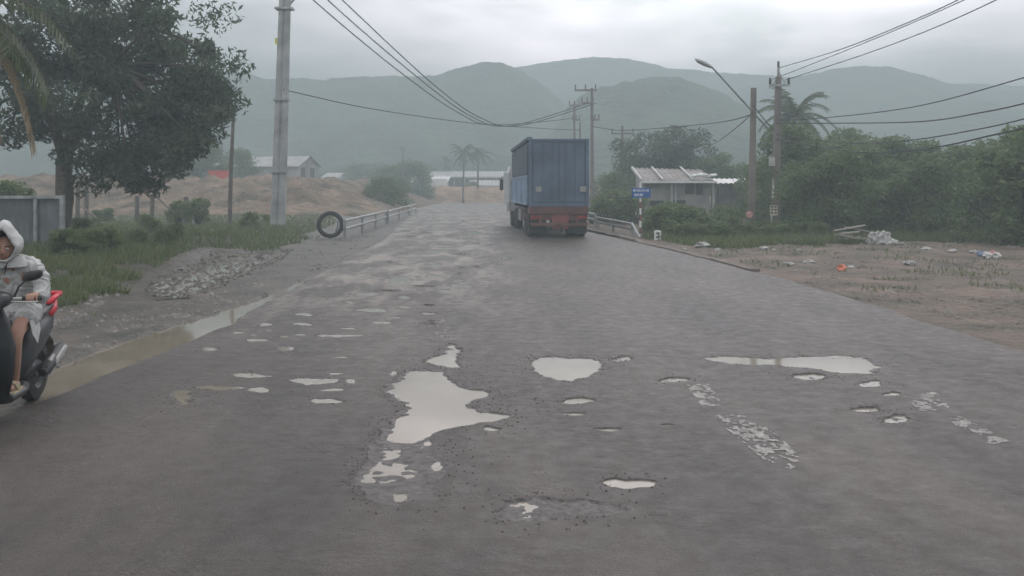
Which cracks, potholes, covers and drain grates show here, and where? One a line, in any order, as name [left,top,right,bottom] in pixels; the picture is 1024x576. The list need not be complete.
pothole [587,472,667,501]
pothole [699,352,902,376]
pothole [225,370,284,381]
pothole [861,408,935,426]
pothole [301,394,362,406]
pothole [422,341,476,370]
pothole [482,488,651,535]
pothole [285,374,351,392]
pothole [152,386,209,412]
pothole [654,373,715,385]
